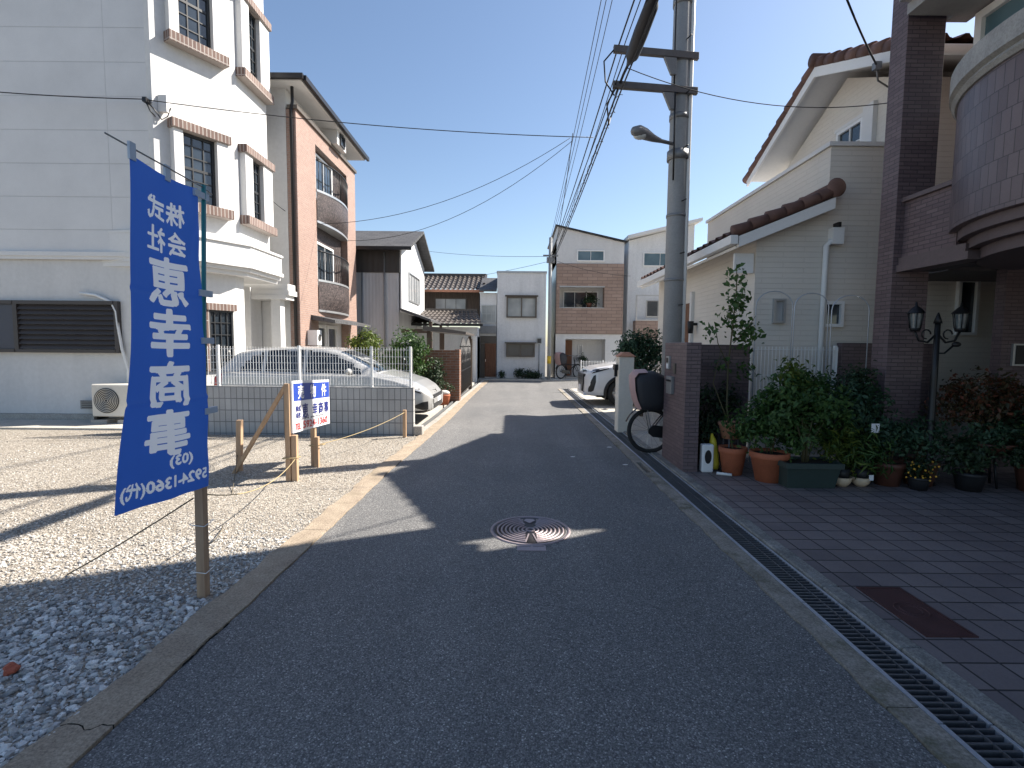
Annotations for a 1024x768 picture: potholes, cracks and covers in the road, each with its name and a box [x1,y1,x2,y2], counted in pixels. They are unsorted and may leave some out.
drain grate [689,502,760,541]
drain grate [732,540,839,605]
drain grate [940,725,1024,768]
manhole cover [490,516,571,551]
utility cover [856,587,979,638]
drain grate [803,603,993,728]
